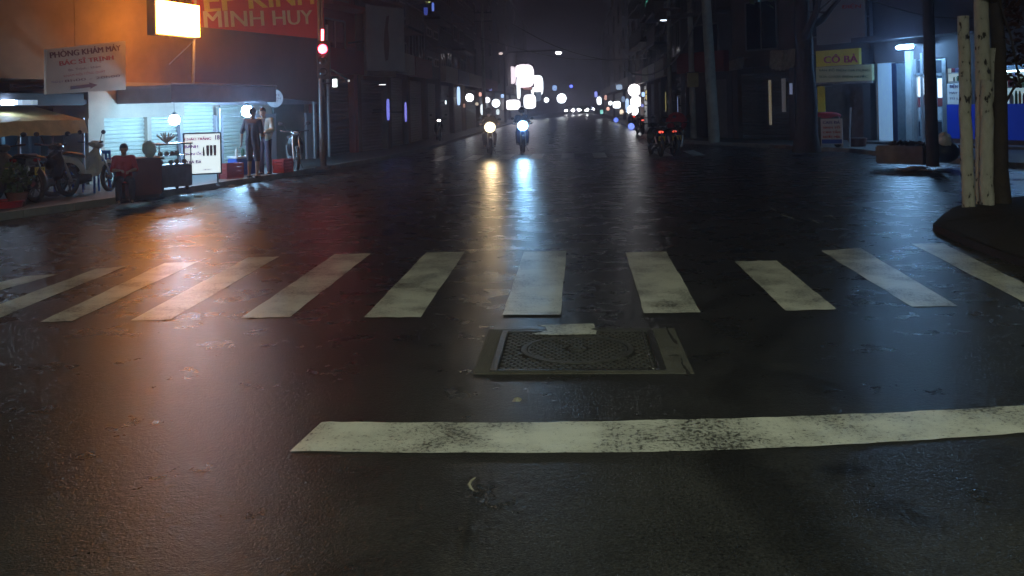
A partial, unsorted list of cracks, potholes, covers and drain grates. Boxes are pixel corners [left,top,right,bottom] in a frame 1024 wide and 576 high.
manhole cover [472,323,694,374]
